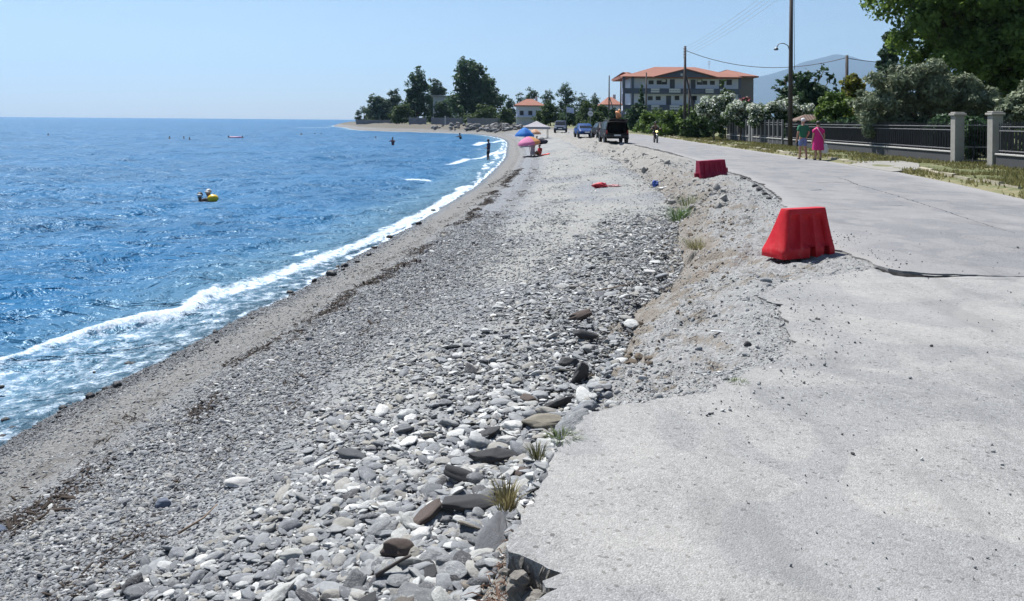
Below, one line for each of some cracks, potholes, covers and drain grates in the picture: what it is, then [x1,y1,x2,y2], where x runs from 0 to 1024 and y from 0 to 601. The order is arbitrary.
crack [874,268,963,278]
